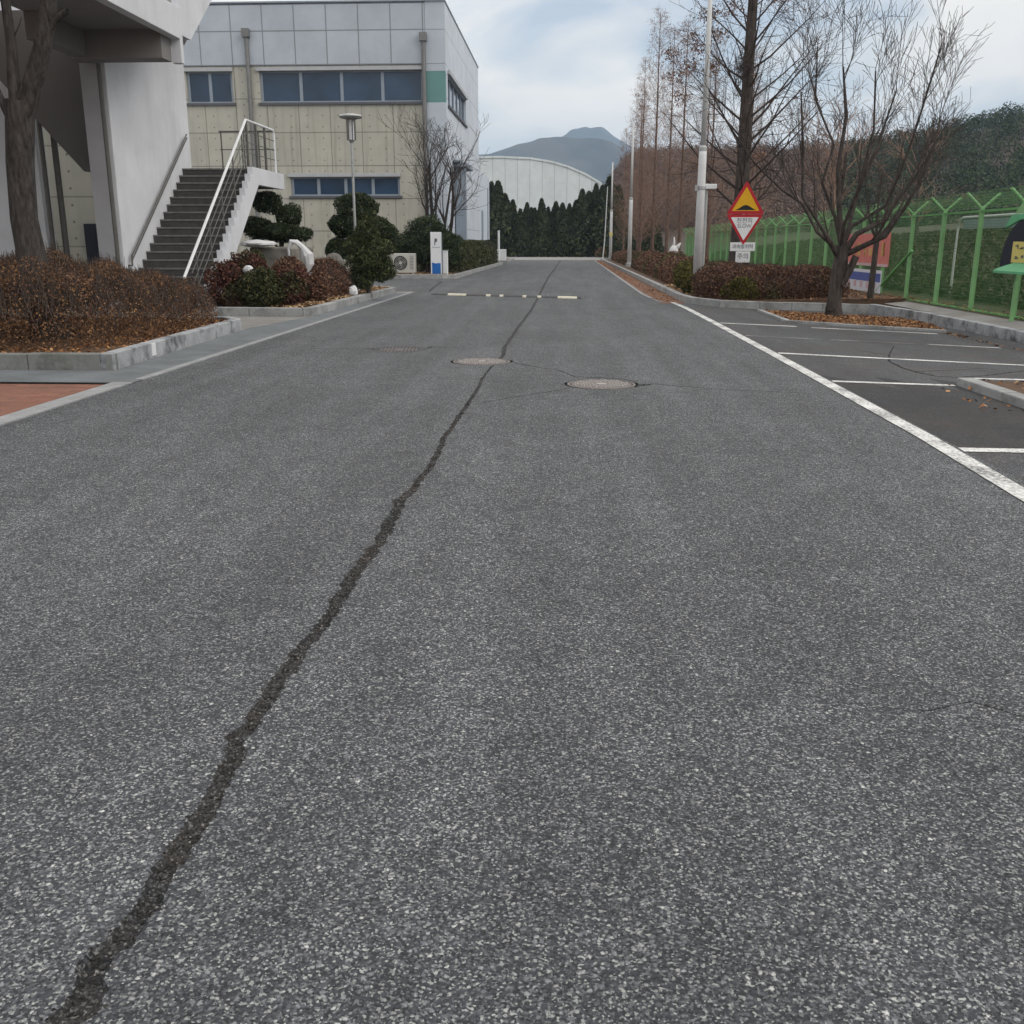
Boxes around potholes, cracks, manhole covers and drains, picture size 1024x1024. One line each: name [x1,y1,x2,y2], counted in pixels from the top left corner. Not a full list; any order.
manhole cover [451,358,511,366]
crack [40,260,811,1024]
crack [910,701,1022,716]
crack [861,347,1021,378]
manhole cover [565,379,636,390]
